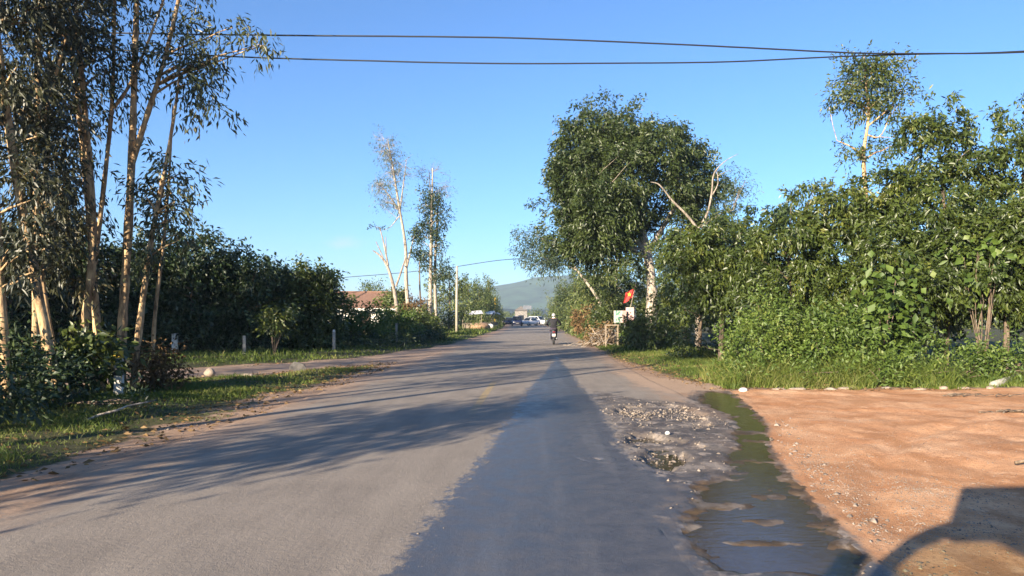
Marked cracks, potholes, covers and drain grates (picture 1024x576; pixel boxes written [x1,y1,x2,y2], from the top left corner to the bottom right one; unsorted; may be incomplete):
pothole [658,390,893,576]
pothole [614,429,718,477]
